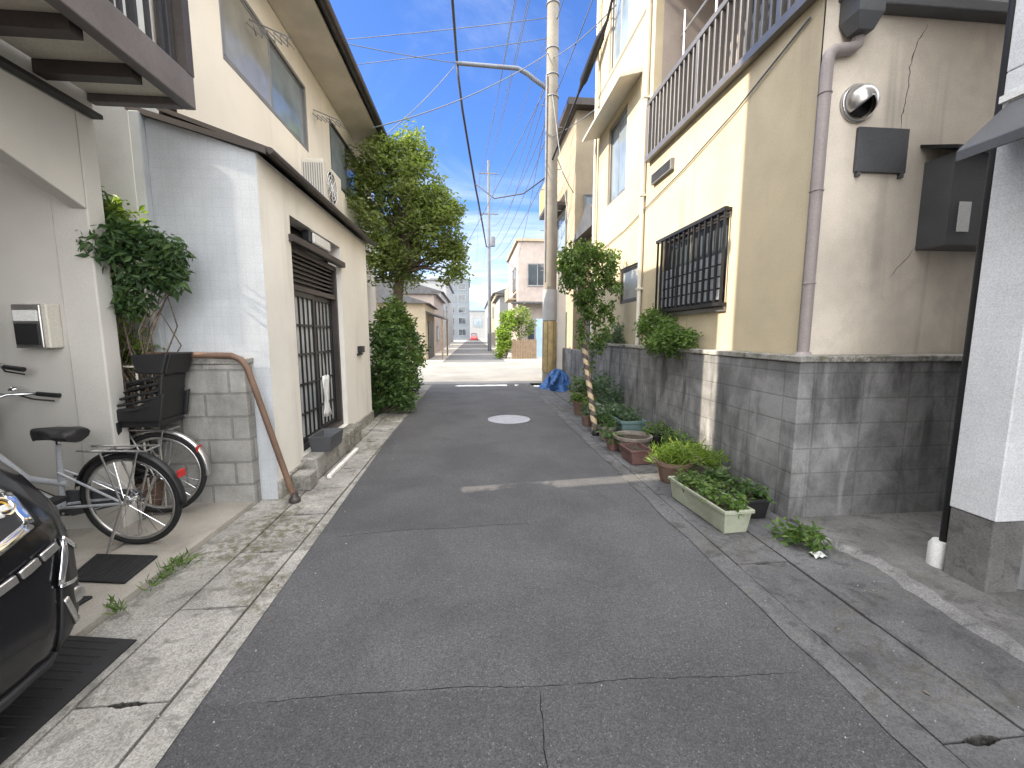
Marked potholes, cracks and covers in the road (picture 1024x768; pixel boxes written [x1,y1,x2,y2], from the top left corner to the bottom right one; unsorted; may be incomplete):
manhole cover [488,415,530,424]
crack [540,694,548,768]
pothole [963,734,1000,746]
